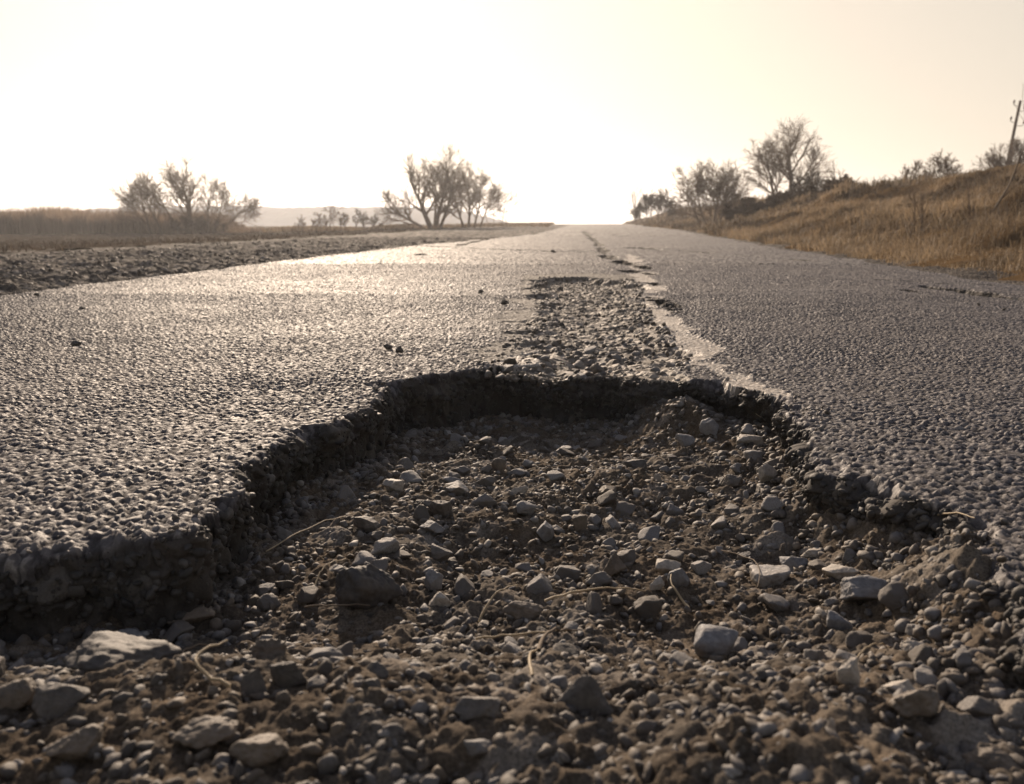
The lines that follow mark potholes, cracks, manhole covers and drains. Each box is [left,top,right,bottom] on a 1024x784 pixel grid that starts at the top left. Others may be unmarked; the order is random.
pothole [468,278,699,388]
crack [874,279,1020,300]
pothole [0,365,1024,784]
